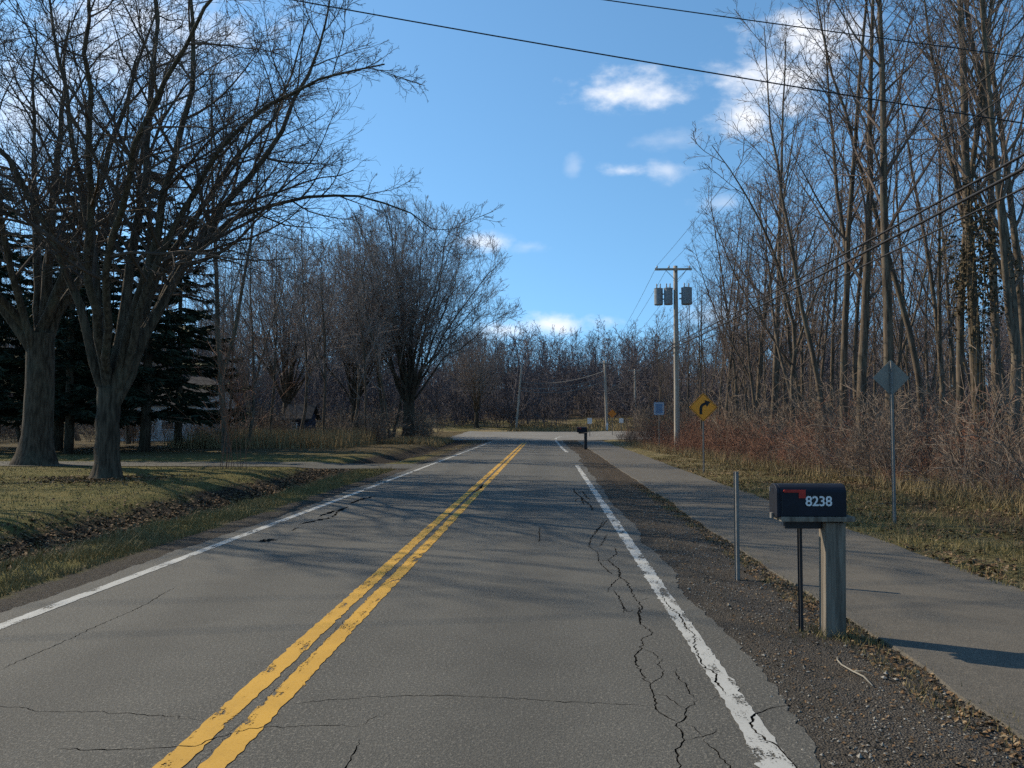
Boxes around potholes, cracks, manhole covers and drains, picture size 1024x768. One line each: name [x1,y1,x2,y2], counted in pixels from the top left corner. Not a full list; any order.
crack [292,496,374,531]
crack [574,489,731,768]
crack [0,706,195,720]
crack [7,588,174,667]
crack [305,695,643,706]
